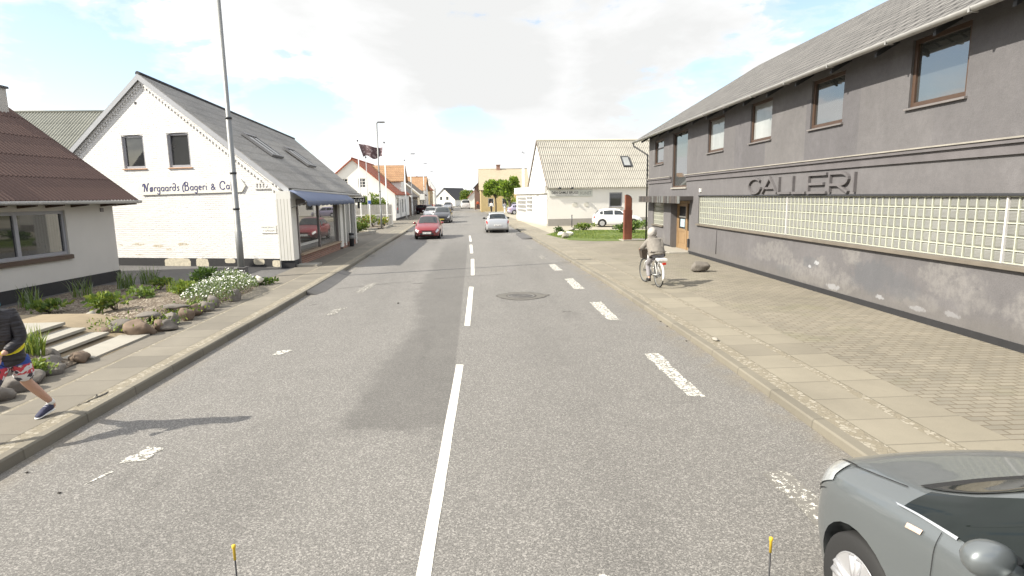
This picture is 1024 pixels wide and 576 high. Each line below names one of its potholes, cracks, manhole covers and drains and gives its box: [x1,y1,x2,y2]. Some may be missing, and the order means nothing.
manhole cover [496,292,549,300]
